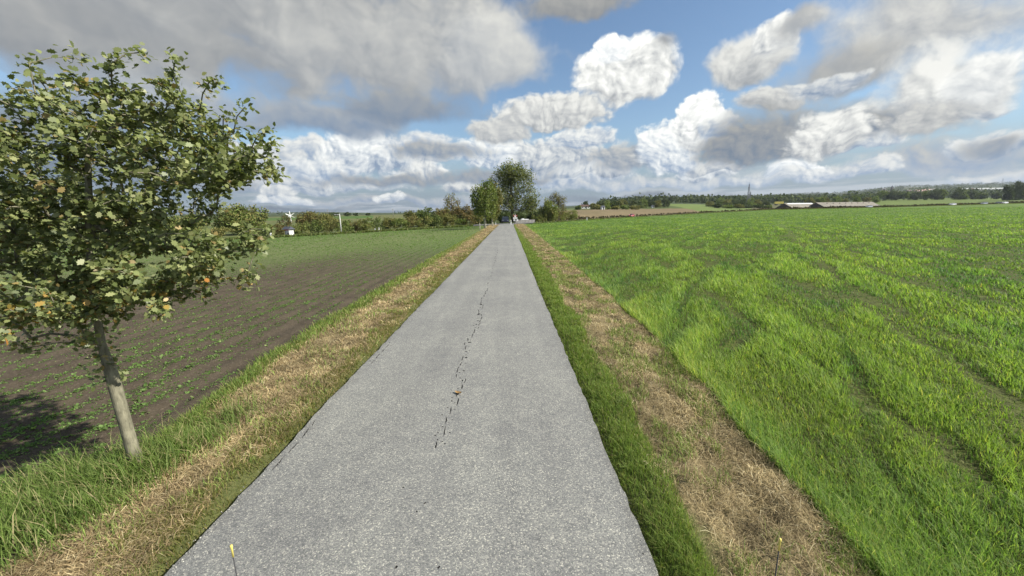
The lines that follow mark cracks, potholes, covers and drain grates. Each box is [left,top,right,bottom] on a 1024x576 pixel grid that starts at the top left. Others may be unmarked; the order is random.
crack [395,252,498,569]
